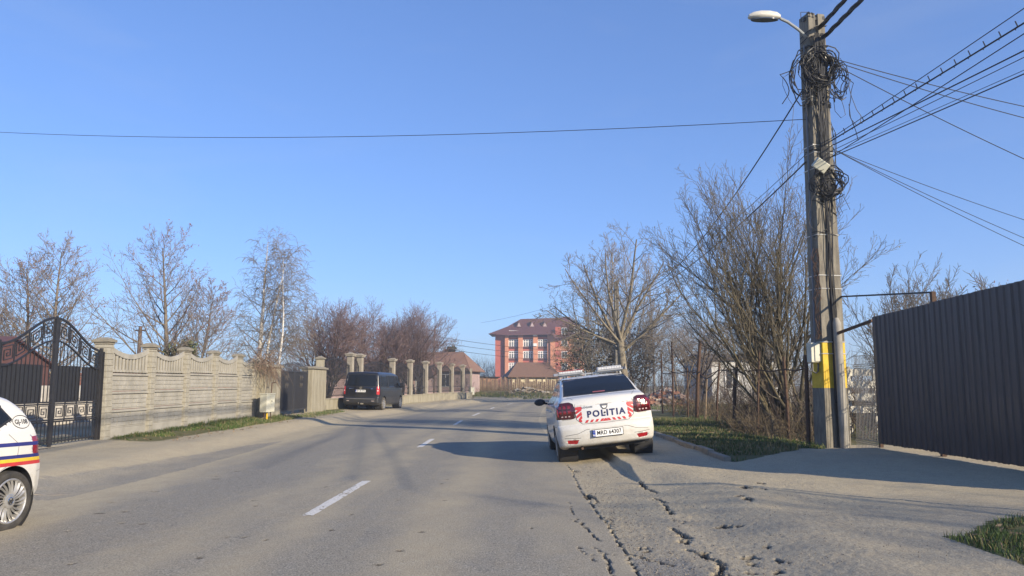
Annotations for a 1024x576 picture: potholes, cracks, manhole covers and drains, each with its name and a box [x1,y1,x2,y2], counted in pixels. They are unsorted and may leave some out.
crack [568,466,727,576]
